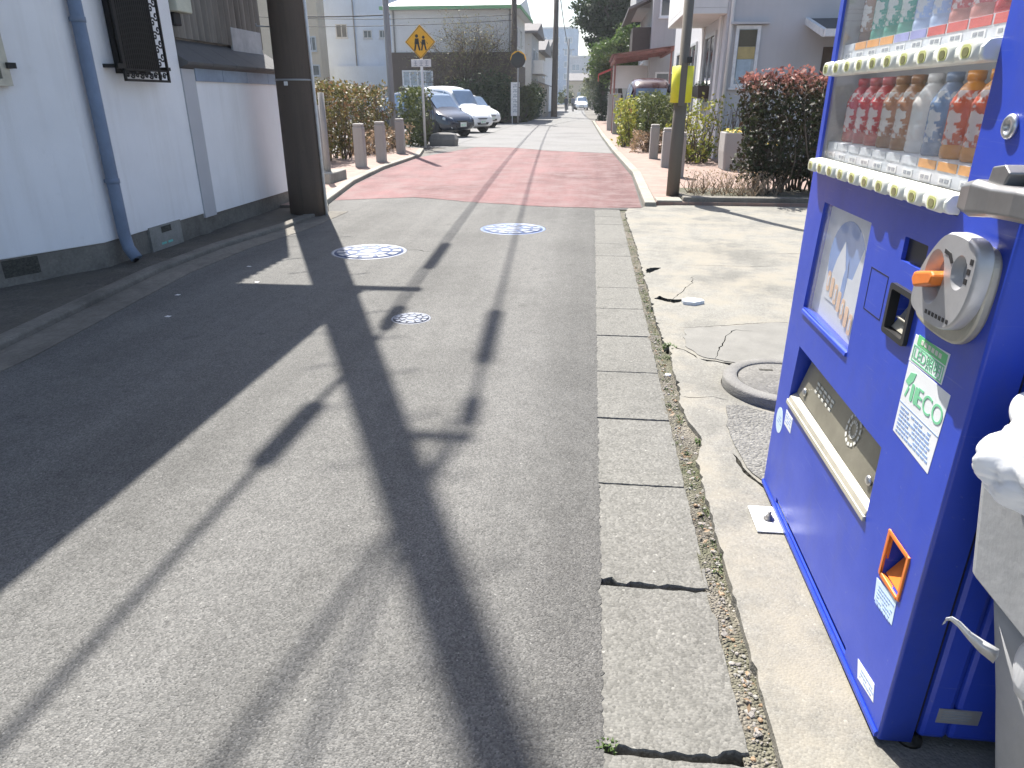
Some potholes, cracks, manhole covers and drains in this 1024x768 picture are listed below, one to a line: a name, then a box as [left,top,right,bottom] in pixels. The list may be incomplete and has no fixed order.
crack [666,322,789,365]
manhole cover [391,313,431,324]
manhole cover [721,359,783,411]
manhole cover [480,223,546,235]
manhole cover [331,244,407,259]
